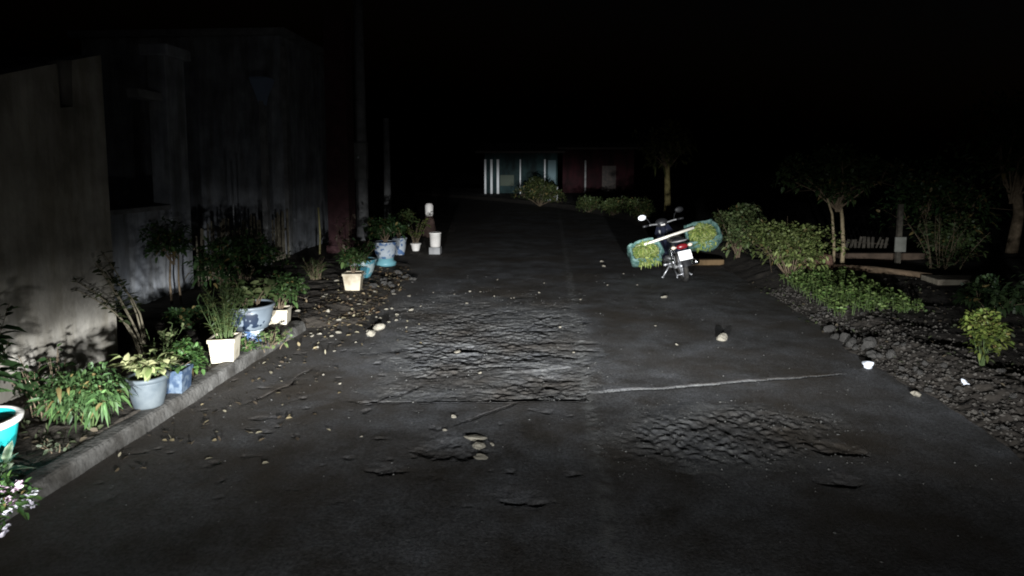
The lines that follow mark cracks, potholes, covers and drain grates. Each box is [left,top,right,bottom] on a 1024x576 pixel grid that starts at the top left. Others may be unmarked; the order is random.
pothole [390,428,491,463]
pothole [488,486,558,509]
pothole [361,463,416,476]
crack [356,391,579,424]
crack [252,370,310,402]
pothole [807,440,873,457]
pothole [805,472,868,489]
